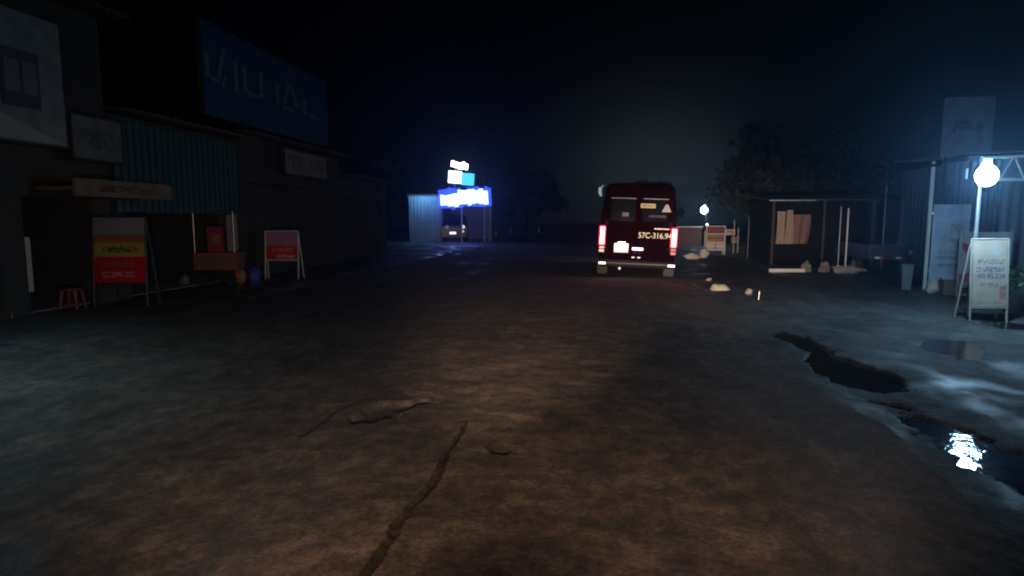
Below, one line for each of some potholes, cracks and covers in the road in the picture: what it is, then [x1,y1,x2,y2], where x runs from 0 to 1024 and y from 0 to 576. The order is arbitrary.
pothole [766,330,922,397]
crack [280,393,480,576]
